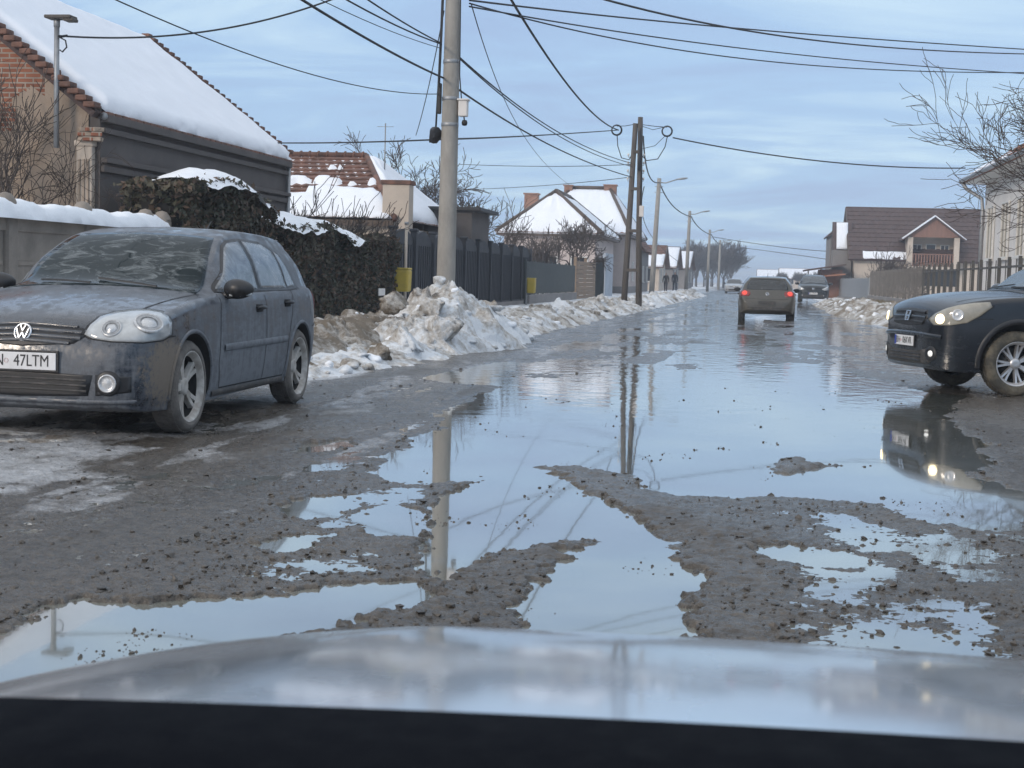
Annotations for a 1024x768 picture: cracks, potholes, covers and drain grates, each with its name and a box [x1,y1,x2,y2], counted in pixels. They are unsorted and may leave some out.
pothole [0,574,455,682]
pothole [403,470,684,584]
pothole [733,536,886,571]
pothole [495,540,727,638]
pothole [263,491,371,522]
pothole [277,436,366,454]
pothole [343,502,429,540]
